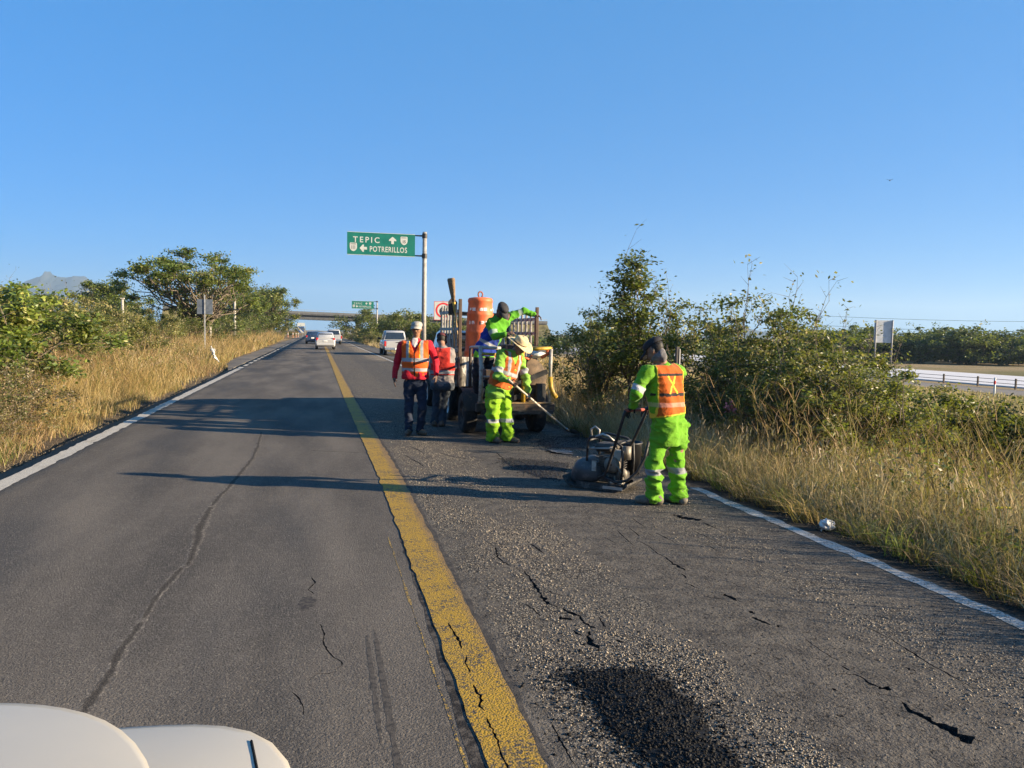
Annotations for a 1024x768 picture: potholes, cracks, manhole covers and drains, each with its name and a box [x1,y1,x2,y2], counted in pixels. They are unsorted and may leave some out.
crack [607,520,721,599]
crack [495,547,624,643]
crack [448,624,509,768]
crack [292,624,343,715]
crack [807,625,973,697]
